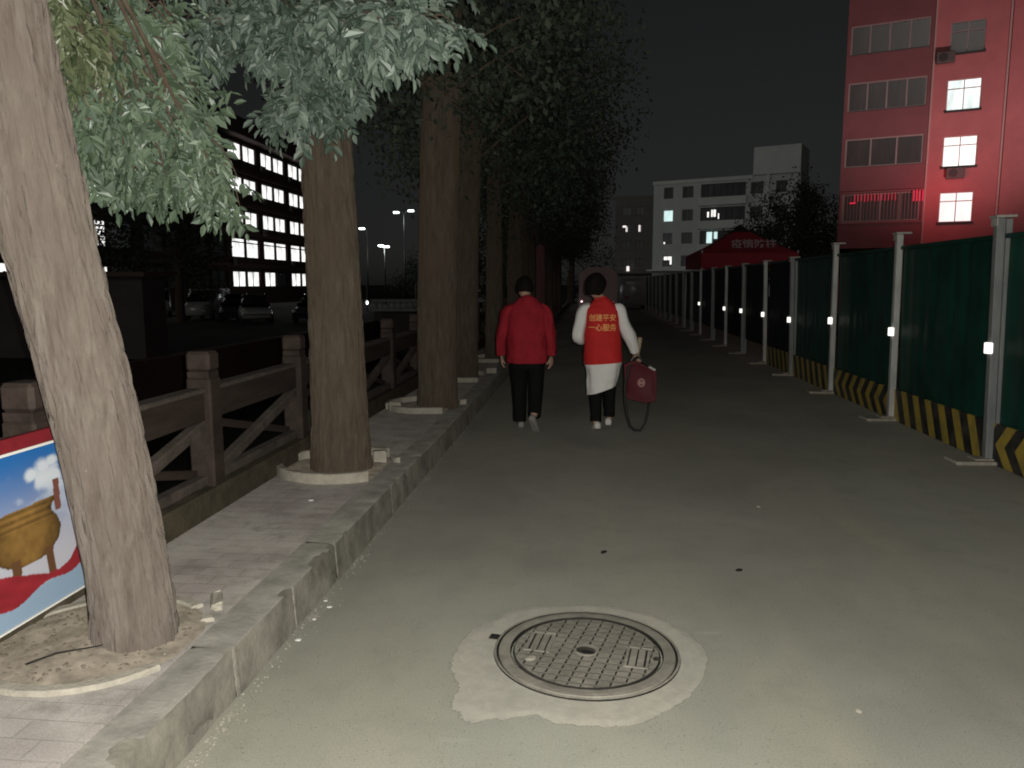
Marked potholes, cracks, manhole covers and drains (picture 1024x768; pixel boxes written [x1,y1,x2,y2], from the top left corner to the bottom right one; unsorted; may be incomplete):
manhole cover [489,611,681,702]
